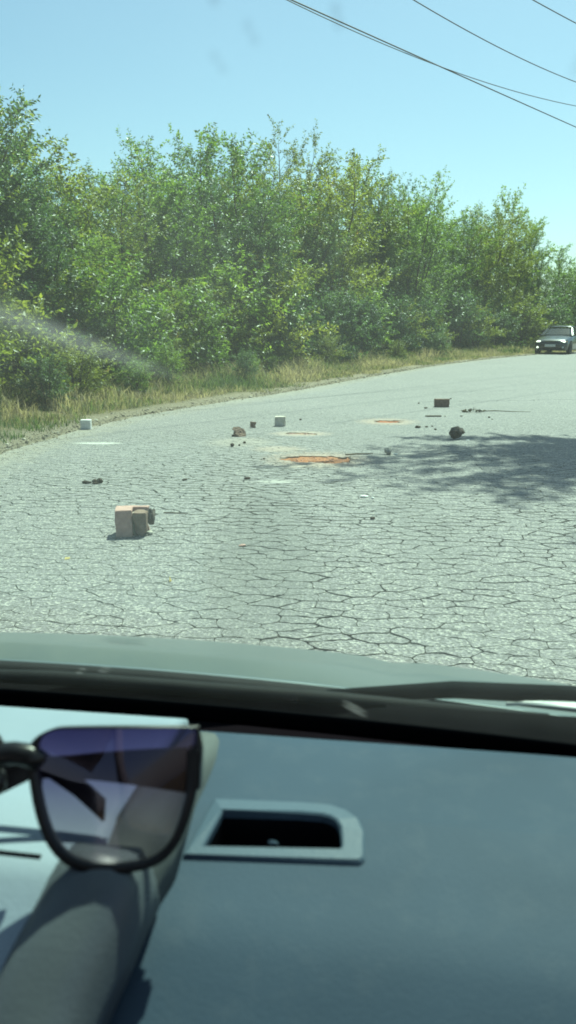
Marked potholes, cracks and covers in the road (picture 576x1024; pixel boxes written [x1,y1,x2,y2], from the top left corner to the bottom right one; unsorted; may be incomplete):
crack [0,399,576,685]
